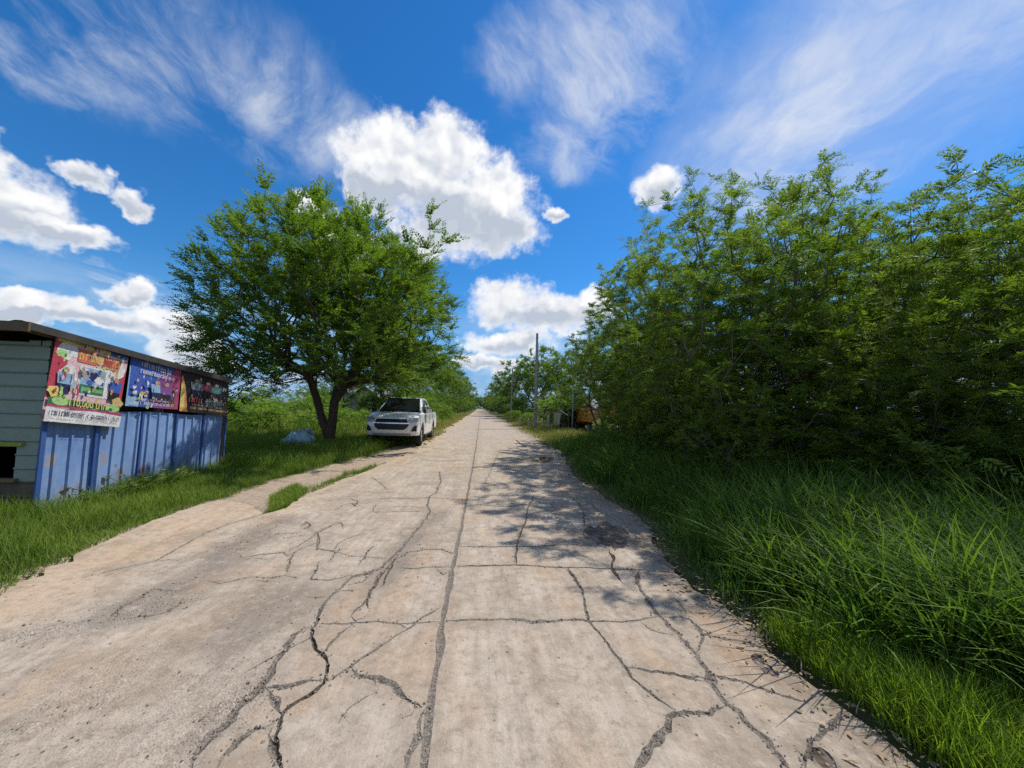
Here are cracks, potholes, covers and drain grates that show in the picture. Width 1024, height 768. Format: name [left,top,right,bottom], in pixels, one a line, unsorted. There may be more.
pothole [582,521,630,550]
crack [107,460,841,768]
